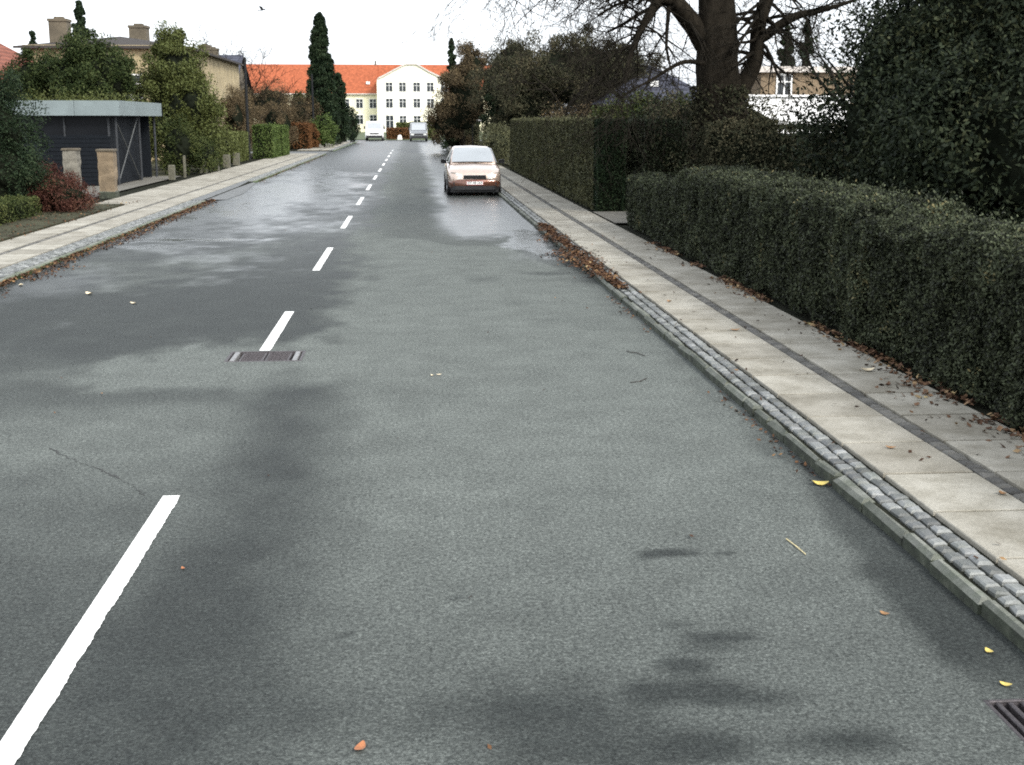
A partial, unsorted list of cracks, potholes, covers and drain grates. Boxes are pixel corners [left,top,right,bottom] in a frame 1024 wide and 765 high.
drain grate [983,698,1024,742]
crack [49,448,145,496]
